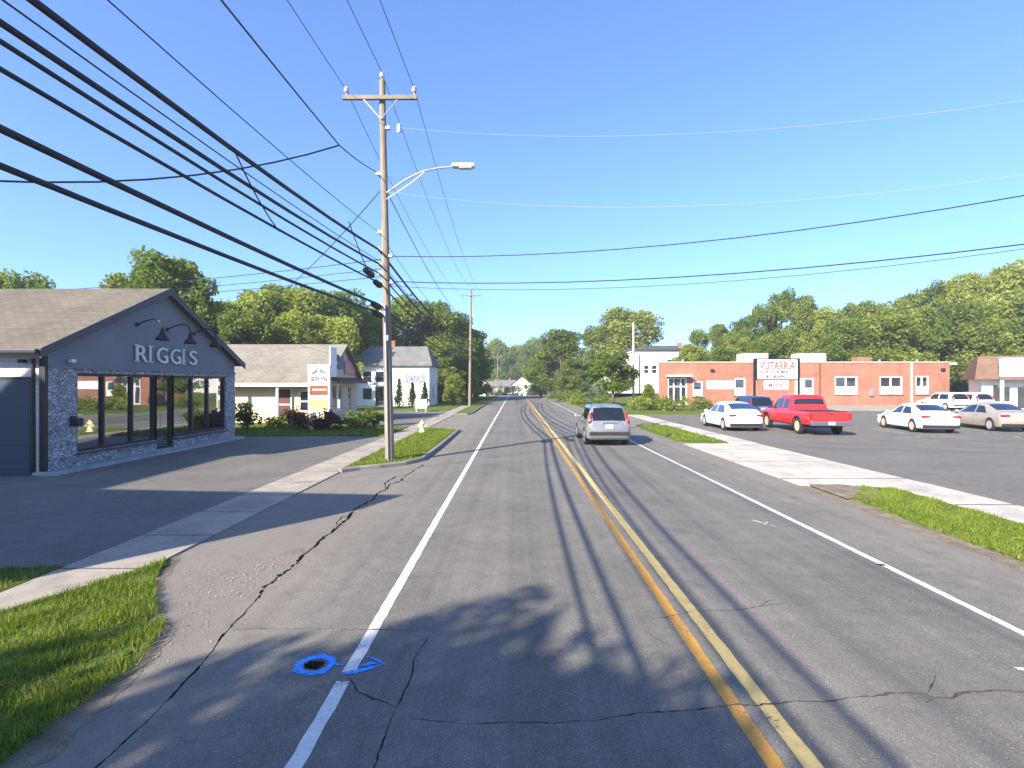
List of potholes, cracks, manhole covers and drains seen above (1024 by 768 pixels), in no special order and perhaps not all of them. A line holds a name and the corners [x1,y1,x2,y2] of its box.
crack [94,464,1024,768]
pothole [303,660,326,670]
